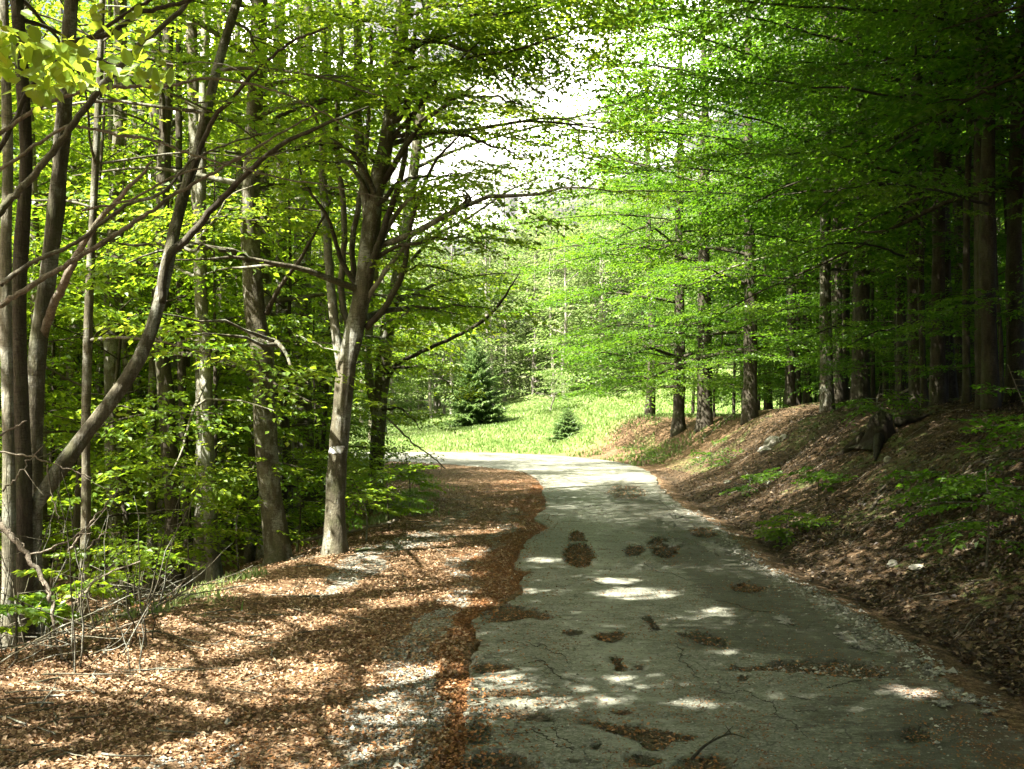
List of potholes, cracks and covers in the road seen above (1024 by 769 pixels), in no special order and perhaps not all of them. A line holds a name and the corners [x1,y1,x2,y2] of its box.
crack [675,643,815,737]
crack [509,727,574,753]
crack [525,641,569,680]
pothole [648,537,678,558]
pothole [564,543,597,568]
